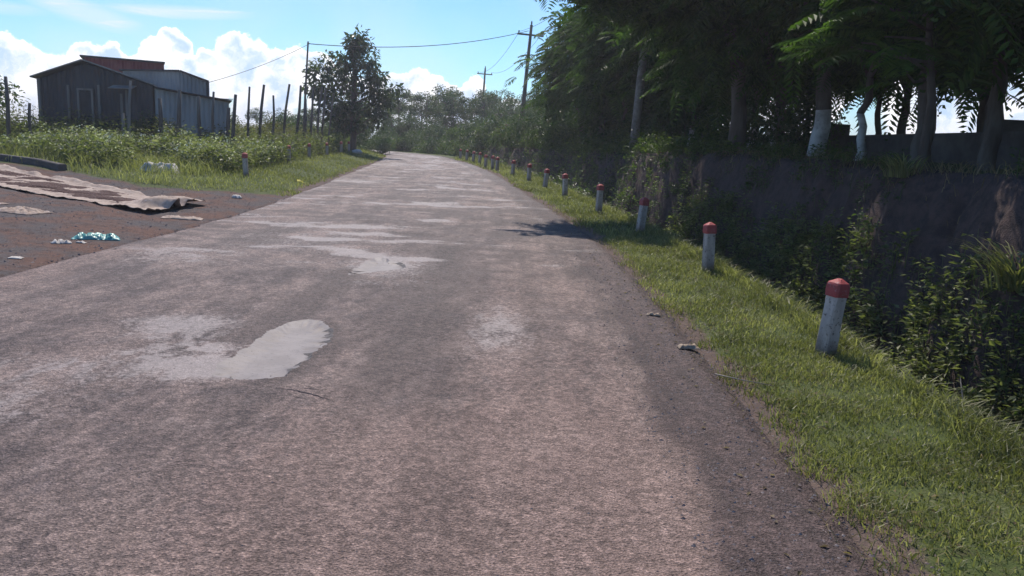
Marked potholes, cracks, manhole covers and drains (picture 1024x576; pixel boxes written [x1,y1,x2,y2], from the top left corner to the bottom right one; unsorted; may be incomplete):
crack [278,388,329,400]
